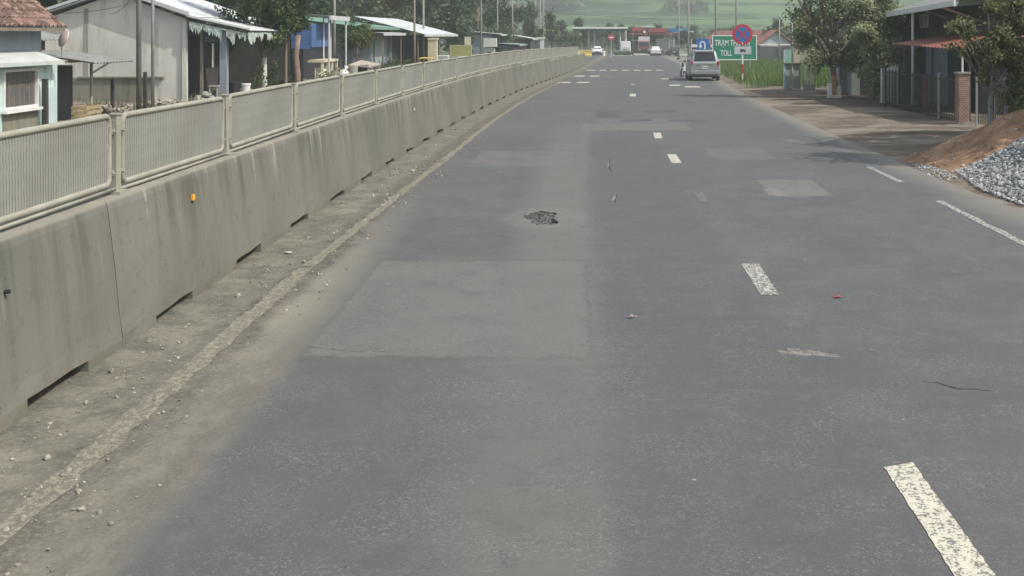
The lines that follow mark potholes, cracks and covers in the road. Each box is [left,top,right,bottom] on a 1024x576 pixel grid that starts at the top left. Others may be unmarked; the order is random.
crack [923,381,988,391]
pothole [522,211,558,225]
